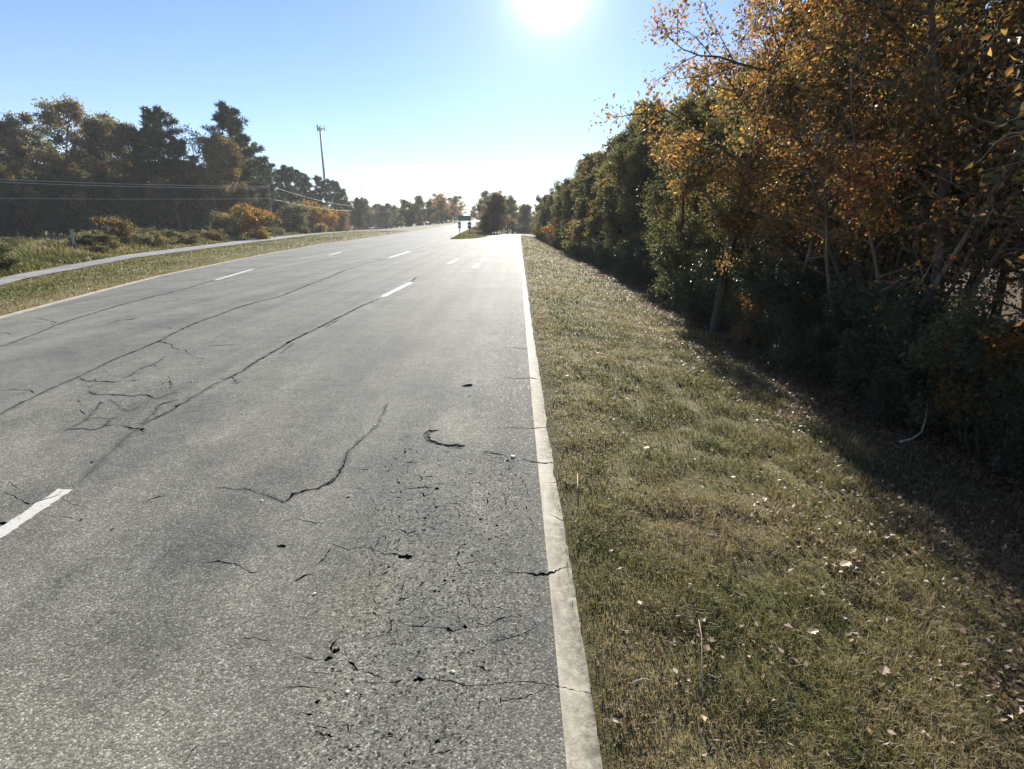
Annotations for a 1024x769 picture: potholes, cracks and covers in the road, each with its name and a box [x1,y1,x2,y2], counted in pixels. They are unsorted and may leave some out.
crack [126,560,259,574]
crack [227,407,575,763]
crack [66,359,188,433]
